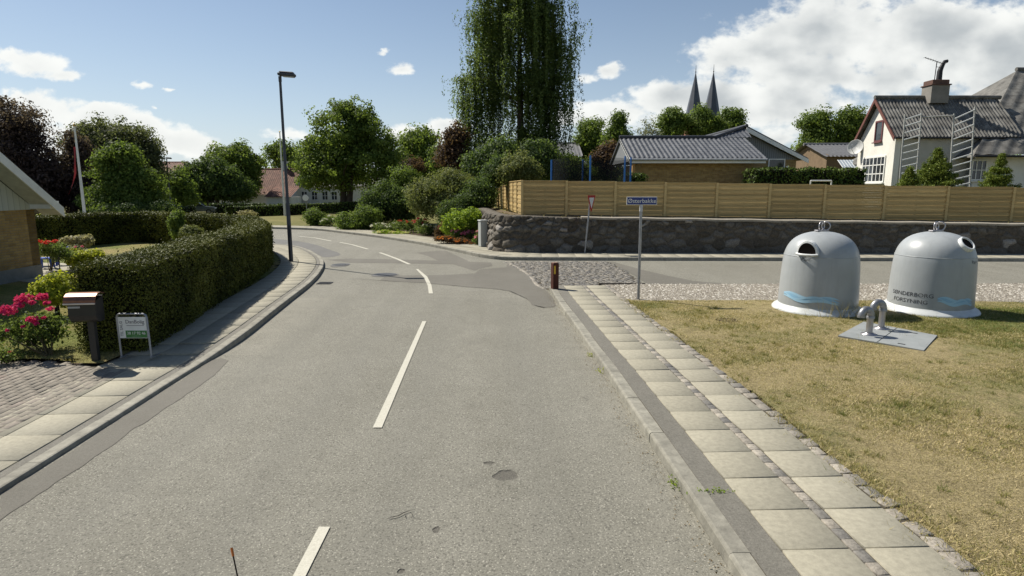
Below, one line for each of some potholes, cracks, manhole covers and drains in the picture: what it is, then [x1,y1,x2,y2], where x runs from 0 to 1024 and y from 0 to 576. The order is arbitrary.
pothole [492,470,518,481]
